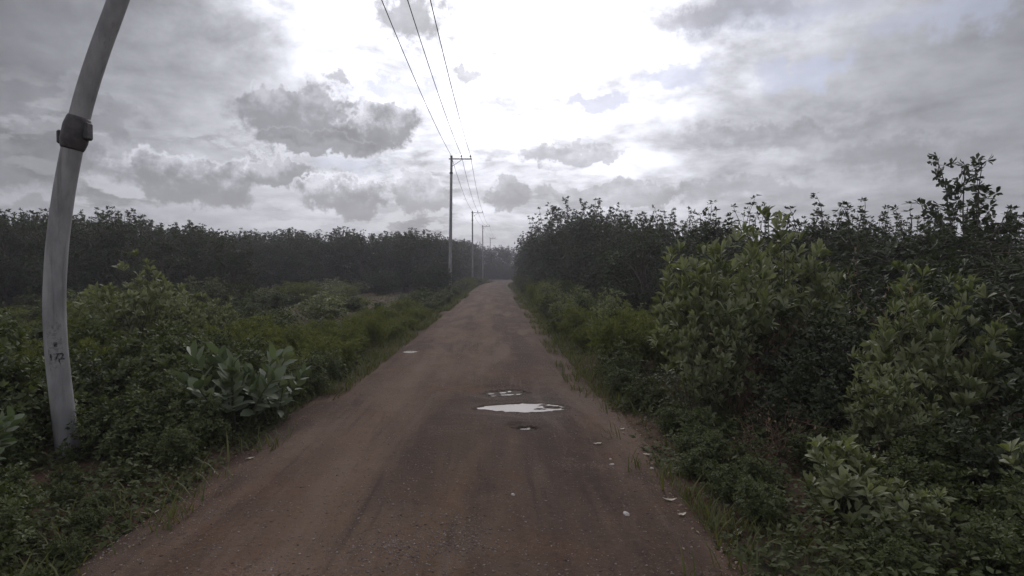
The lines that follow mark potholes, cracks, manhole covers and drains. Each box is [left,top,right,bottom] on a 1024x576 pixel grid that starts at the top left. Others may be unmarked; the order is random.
pothole [482,389,534,397]
pothole [471,402,571,413]
